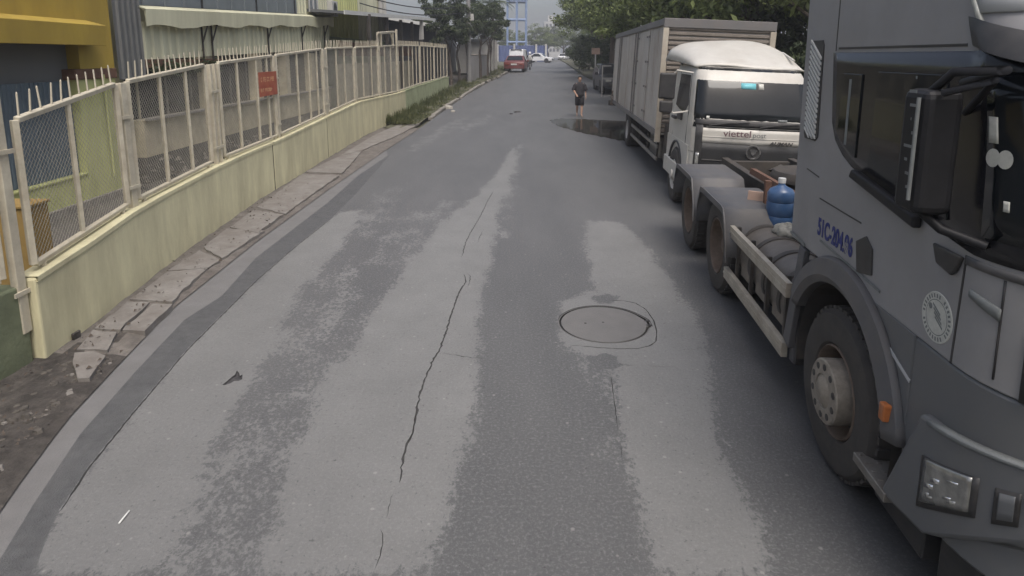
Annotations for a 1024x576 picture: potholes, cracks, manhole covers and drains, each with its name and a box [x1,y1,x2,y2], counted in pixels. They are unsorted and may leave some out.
manhole cover [558,305,653,343]
crack [375,192,493,568]
